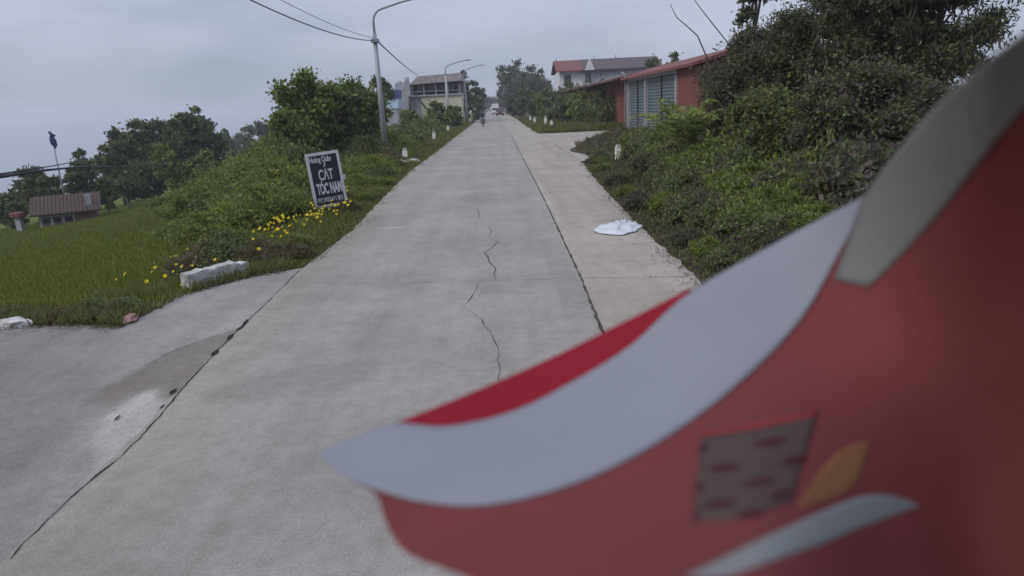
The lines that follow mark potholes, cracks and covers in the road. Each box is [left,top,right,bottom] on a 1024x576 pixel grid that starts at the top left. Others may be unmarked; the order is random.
crack [464,211,501,381]
